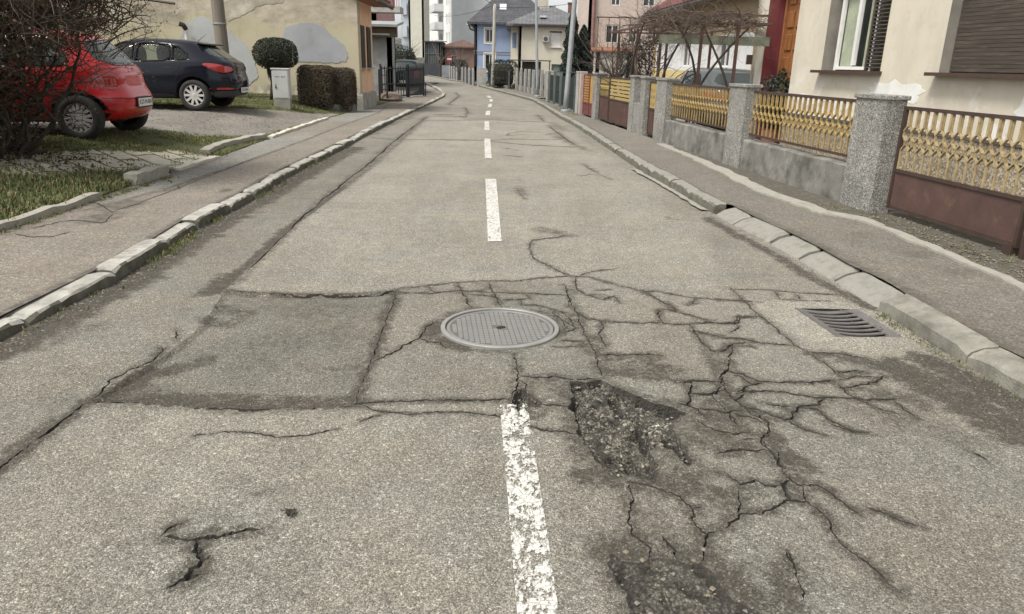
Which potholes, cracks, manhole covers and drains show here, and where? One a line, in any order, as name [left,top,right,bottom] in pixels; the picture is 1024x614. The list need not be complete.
drain grate [795,308,902,337]
crack [354,235,922,602]
pothole [567,380,692,483]
crack [94,330,179,398]
manhole cover [441,308,559,350]
crack [194,428,337,438]
crack [161,523,263,588]
